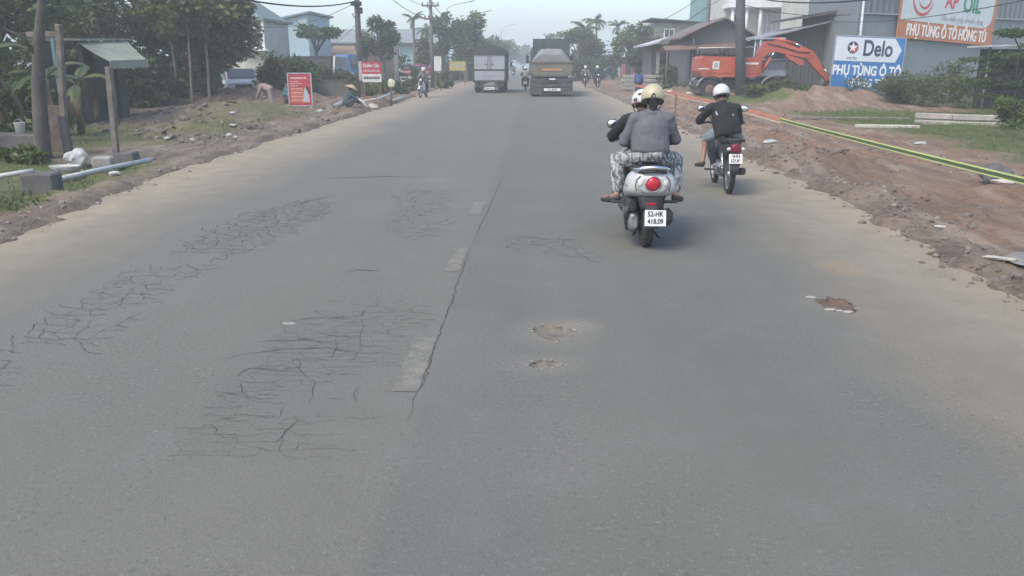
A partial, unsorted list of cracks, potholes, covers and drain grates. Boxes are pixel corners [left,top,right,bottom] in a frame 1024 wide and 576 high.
crack [0,196,330,386]
crack [503,235,596,262]
pothole [530,325,578,343]
pothole [806,296,858,314]
crack [408,182,501,419]
crack [318,176,457,239]
crack [169,297,436,459]
pothole [524,359,568,369]
